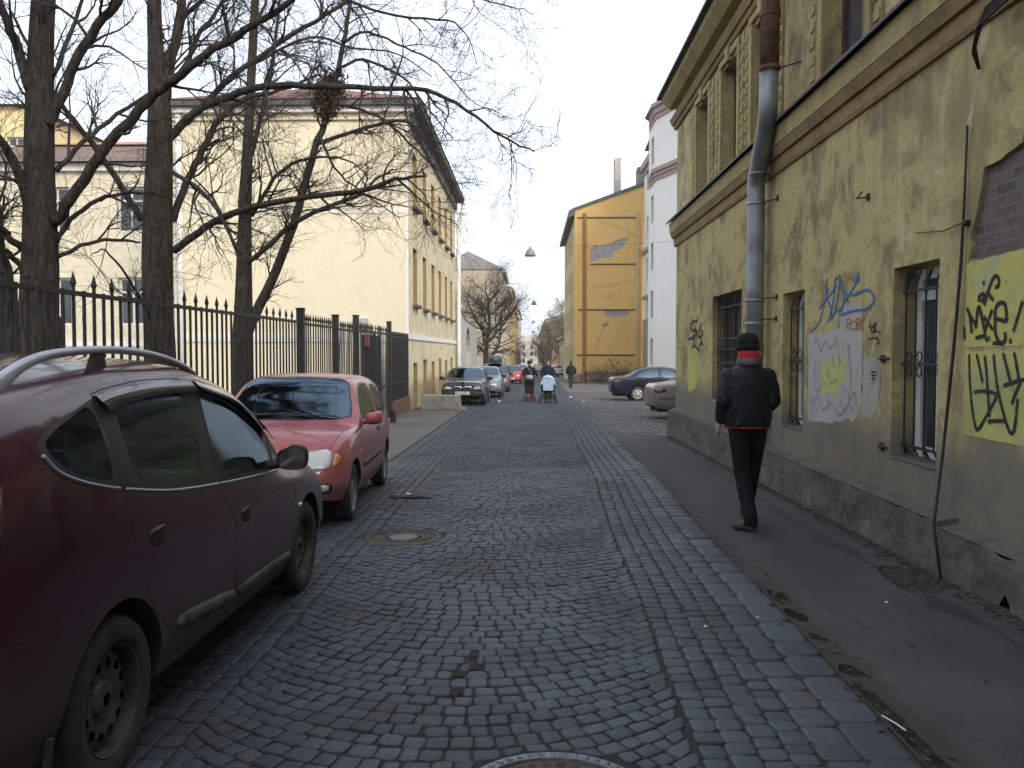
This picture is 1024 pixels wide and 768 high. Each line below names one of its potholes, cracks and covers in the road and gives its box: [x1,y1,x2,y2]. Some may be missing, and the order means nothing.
manhole cover [481,752,624,768]
pothole [877,565,946,595]
manhole cover [364,529,442,546]
